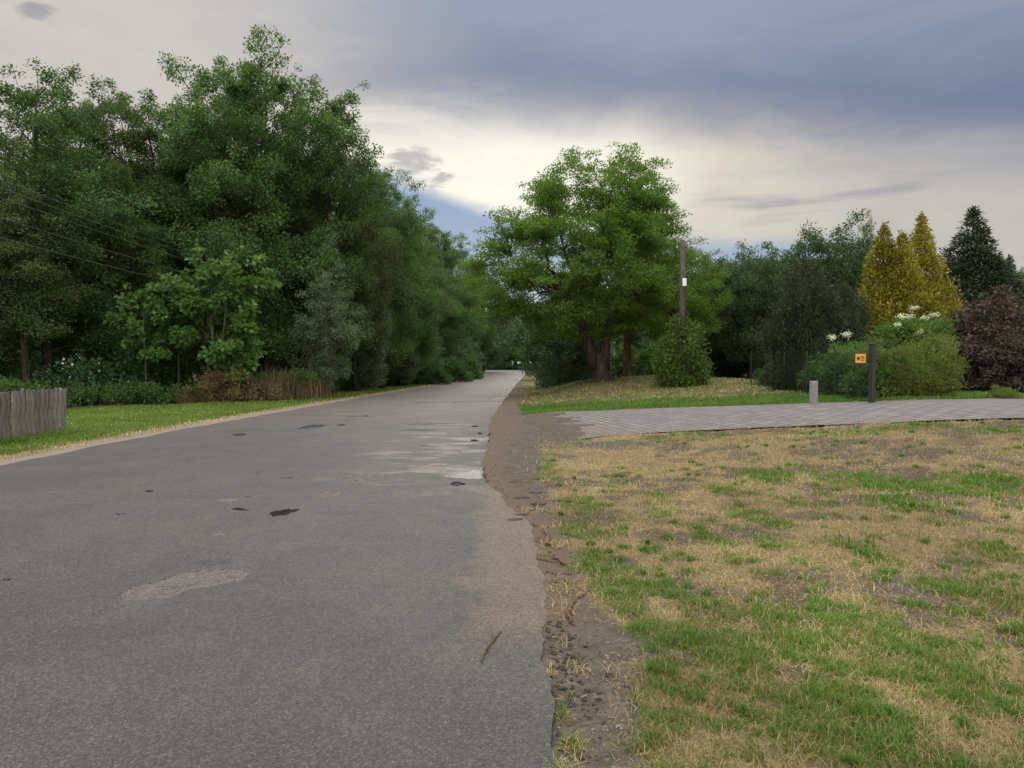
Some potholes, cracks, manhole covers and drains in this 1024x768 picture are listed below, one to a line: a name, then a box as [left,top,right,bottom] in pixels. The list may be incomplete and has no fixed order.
pothole [269,509,299,517]
